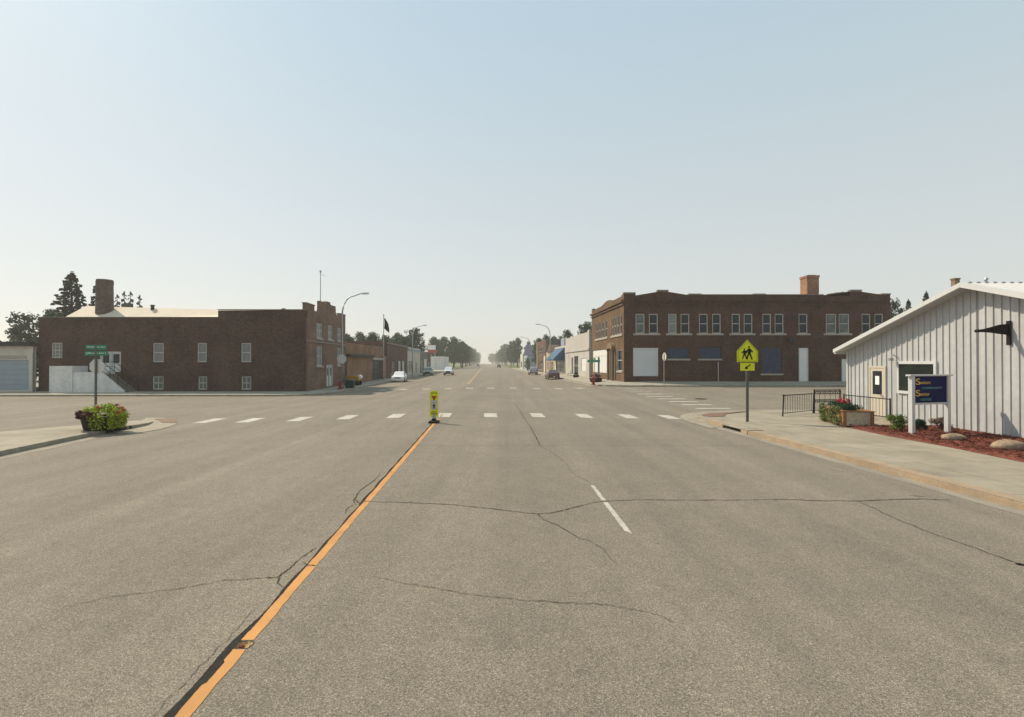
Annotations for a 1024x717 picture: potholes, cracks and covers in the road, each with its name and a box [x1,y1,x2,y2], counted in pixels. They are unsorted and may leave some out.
drain grate [722,423,763,433]
crack [60,547,317,608]
crack [236,479,1014,563]
crack [515,404,708,479]
crack [369,575,664,617]
